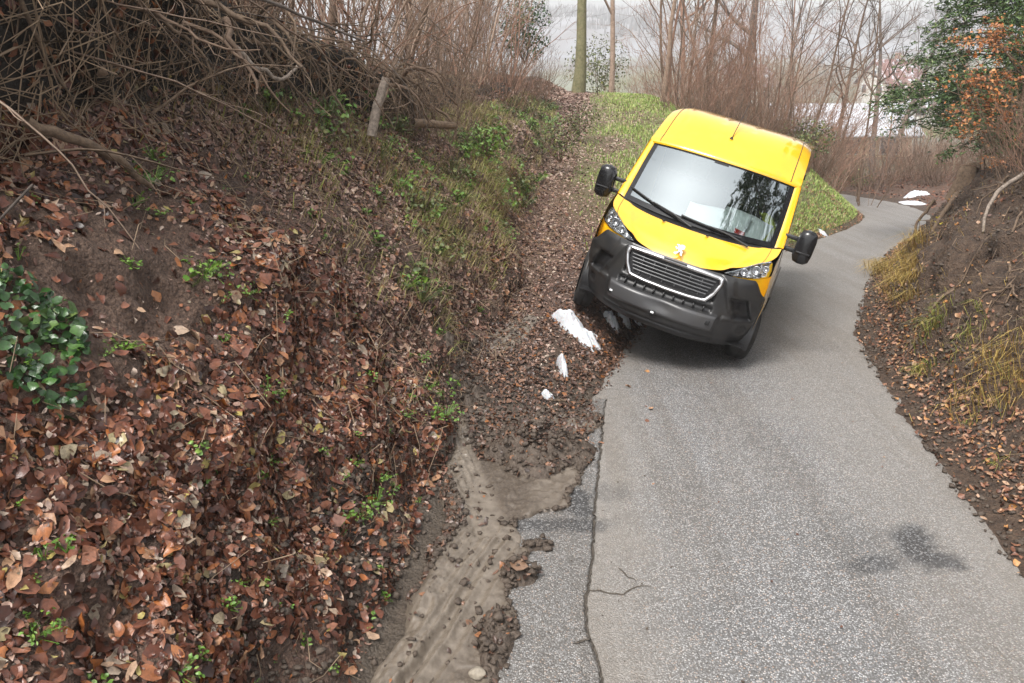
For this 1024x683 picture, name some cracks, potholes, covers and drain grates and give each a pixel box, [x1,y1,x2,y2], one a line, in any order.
crack [573,399,645,683]
